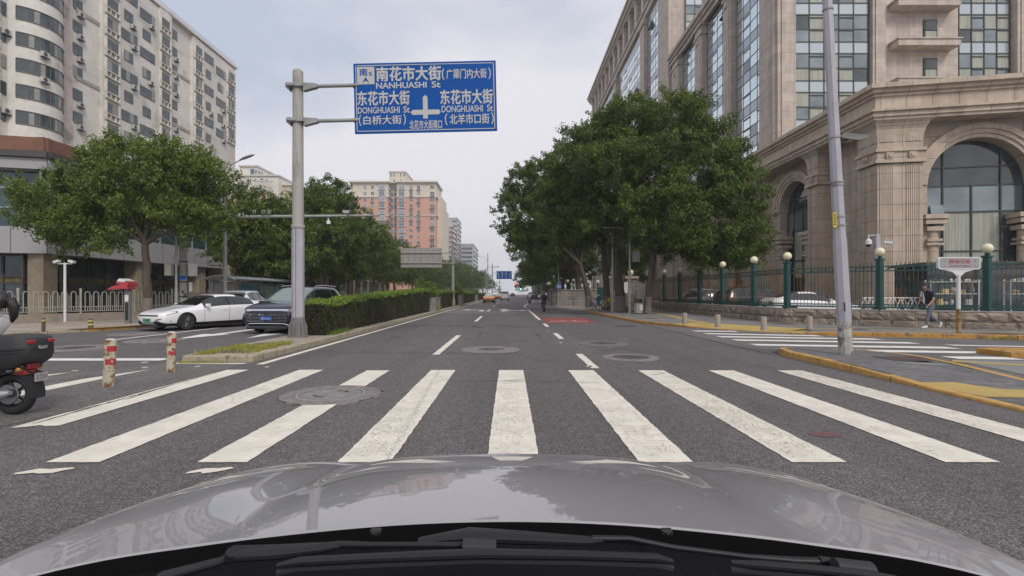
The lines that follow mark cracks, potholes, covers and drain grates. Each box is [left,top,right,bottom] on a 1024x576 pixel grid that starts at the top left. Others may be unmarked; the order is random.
manhole cover [278,385,382,406]
